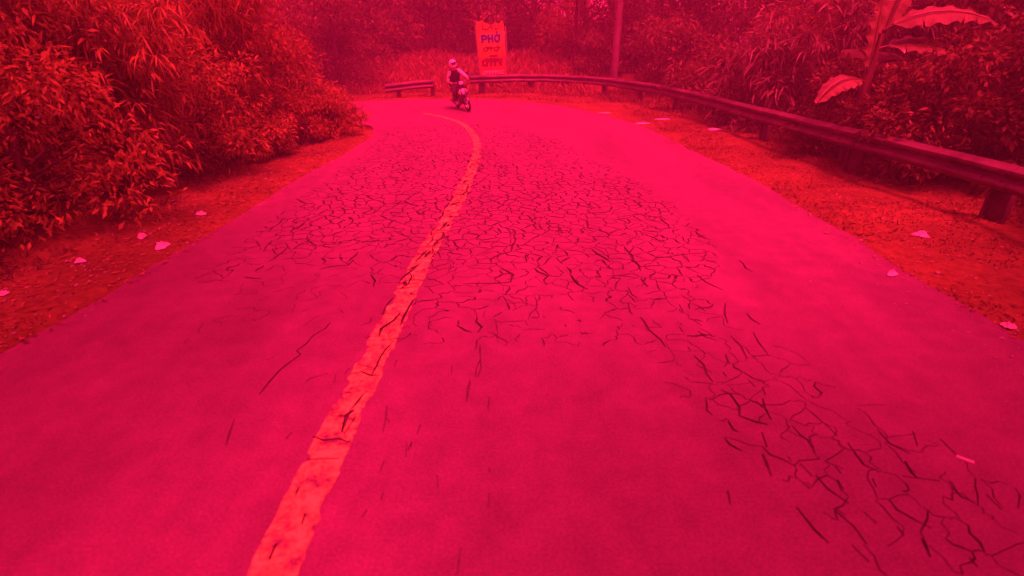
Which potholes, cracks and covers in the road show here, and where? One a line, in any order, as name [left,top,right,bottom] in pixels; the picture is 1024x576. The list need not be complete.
crack [185,125,1024,576]
